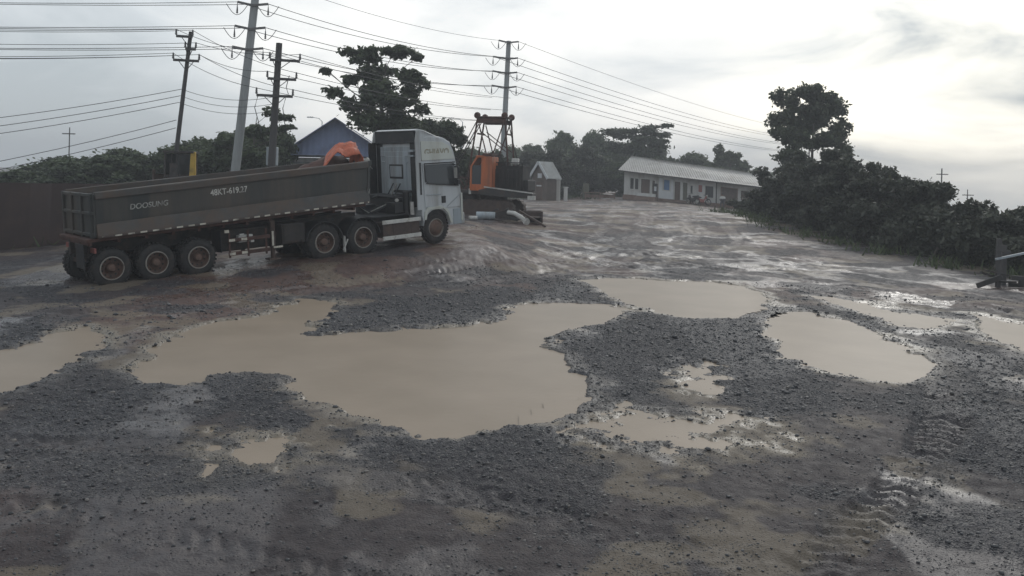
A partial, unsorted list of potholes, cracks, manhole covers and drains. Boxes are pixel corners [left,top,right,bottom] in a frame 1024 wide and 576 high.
pothole [519,395,803,455]
pothole [804,294,981,330]
pothole [149,424,335,480]
pothole [640,355,742,398]
pothole [951,311,1024,351]
pothole [747,309,946,384]
pothole [118,296,635,444]
pothole [571,276,784,319]
pothole [0,323,117,394]
